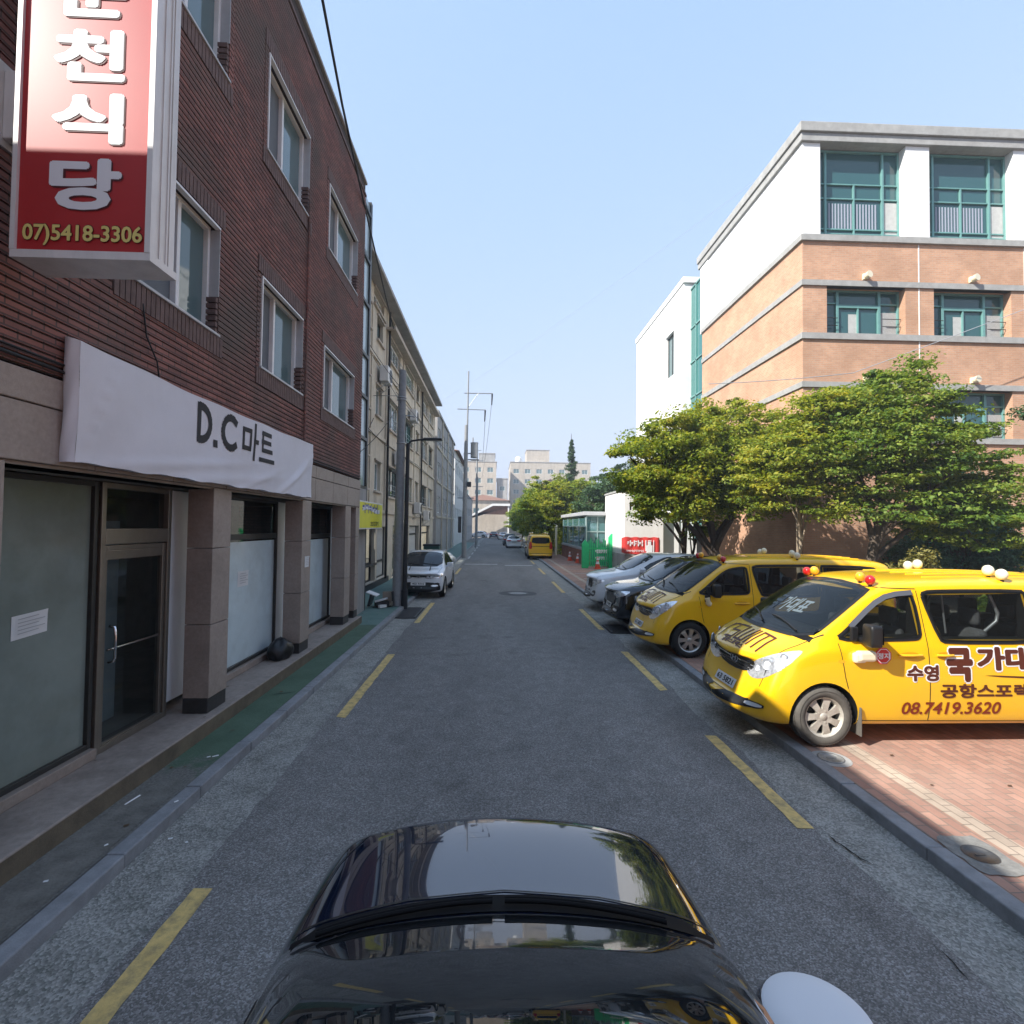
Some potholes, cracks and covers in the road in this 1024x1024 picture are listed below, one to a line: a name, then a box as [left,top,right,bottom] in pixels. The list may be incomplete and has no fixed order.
crack [826,833,873,865]
manhole cover [937,835,1024,877]
manhole cover [812,751,853,767]
